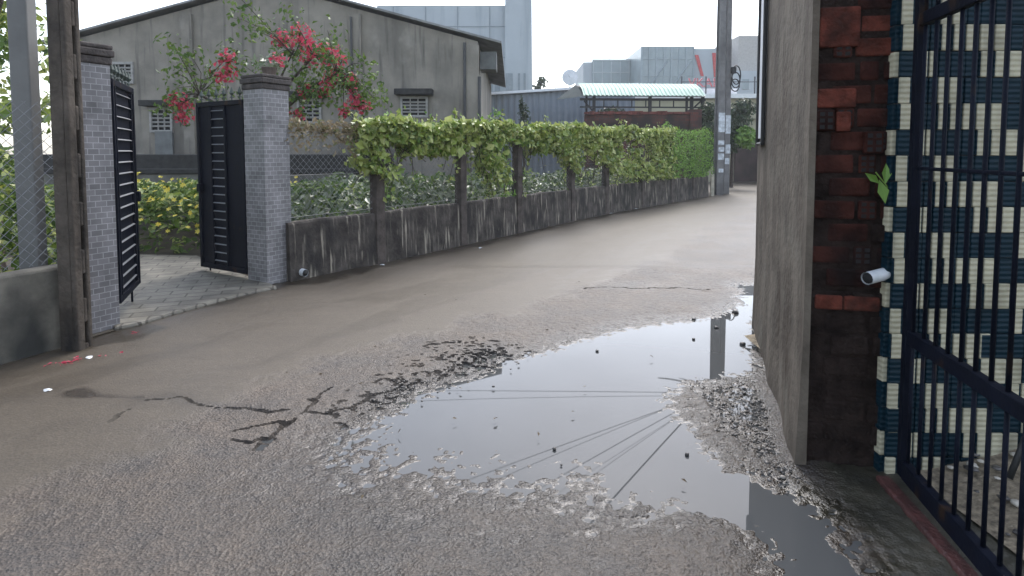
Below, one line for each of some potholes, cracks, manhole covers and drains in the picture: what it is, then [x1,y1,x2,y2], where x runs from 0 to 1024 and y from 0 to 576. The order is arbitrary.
crack [105,336,538,451]
pothole [448,348,514,368]
